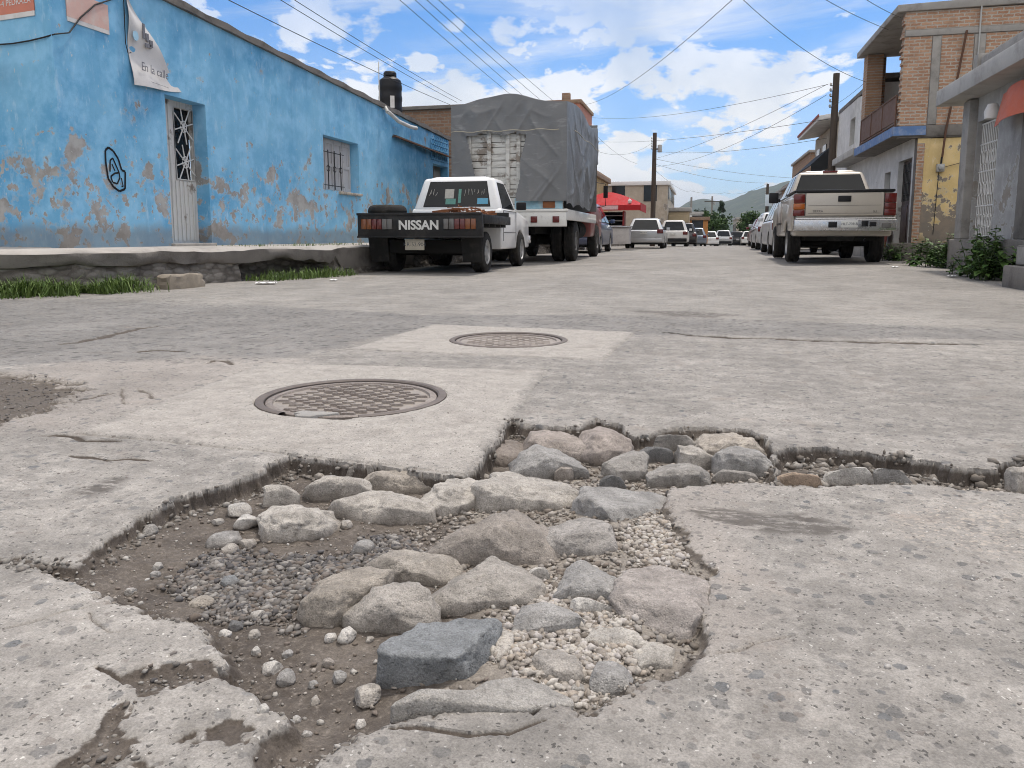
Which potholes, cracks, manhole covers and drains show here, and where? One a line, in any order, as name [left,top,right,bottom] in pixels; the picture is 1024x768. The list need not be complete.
pothole [772,446,1024,491]
crack [66,327,187,353]
pothole [11,418,778,768]
pothole [0,372,98,426]
manhole cover [450,332,567,348]
manhole cover [254,379,446,420]
crack [45,433,155,462]
